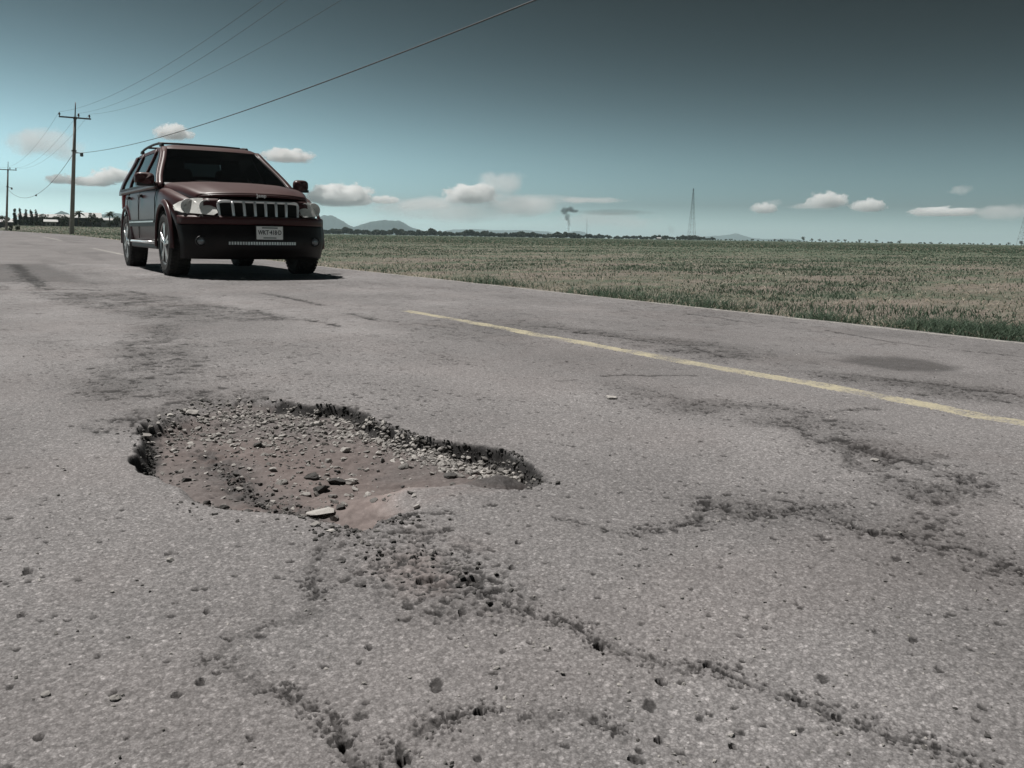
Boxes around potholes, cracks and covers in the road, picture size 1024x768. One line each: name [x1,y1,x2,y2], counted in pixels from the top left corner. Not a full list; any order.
pothole [125,390,555,535]
crack [901,456,954,480]
crack [187,498,1024,768]
crack [727,404,886,445]
